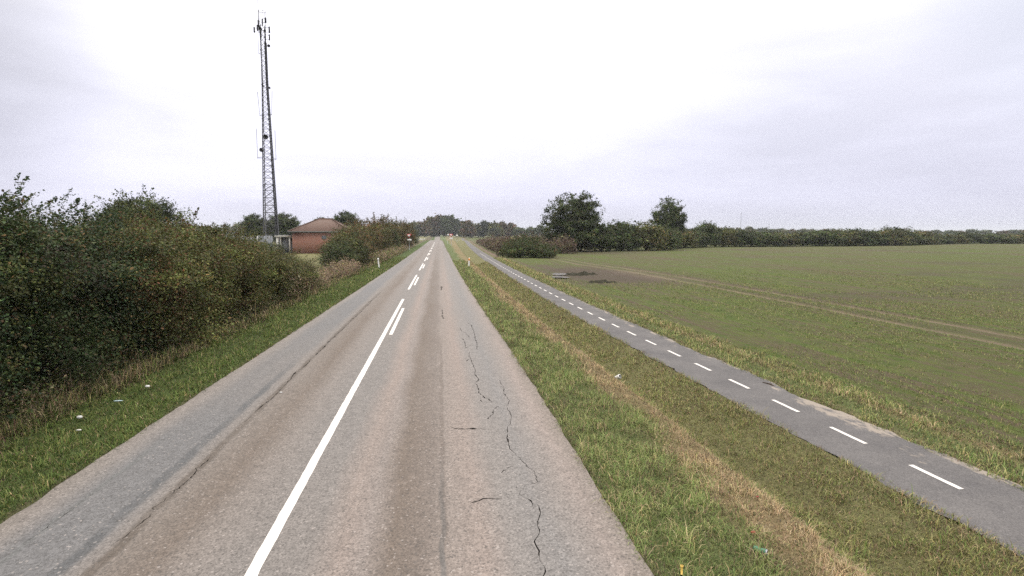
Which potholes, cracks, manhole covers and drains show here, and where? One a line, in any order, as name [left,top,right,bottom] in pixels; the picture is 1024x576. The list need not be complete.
crack [442,310,546,576]
